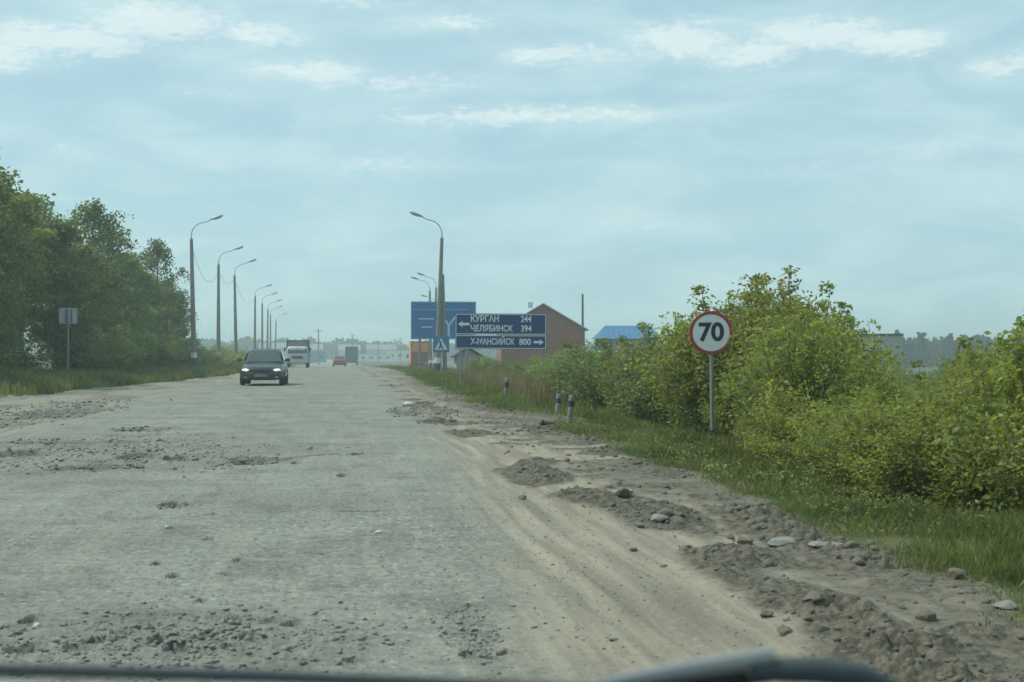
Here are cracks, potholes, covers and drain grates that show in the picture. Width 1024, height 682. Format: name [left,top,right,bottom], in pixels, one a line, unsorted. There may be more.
pothole [62,642,84,652]
pothole [2,641,43,655]
pothole [21,405,120,419]
pothole [162,639,190,652]
pothole [282,618,303,627]
pothole [116,451,162,461]
pothole [236,630,257,641]
pothole [230,458,276,466]
pothole [43,463,131,472]
pothole [390,406,435,416]
pothole [0,449,66,459]
pothole [18,614,40,625]
